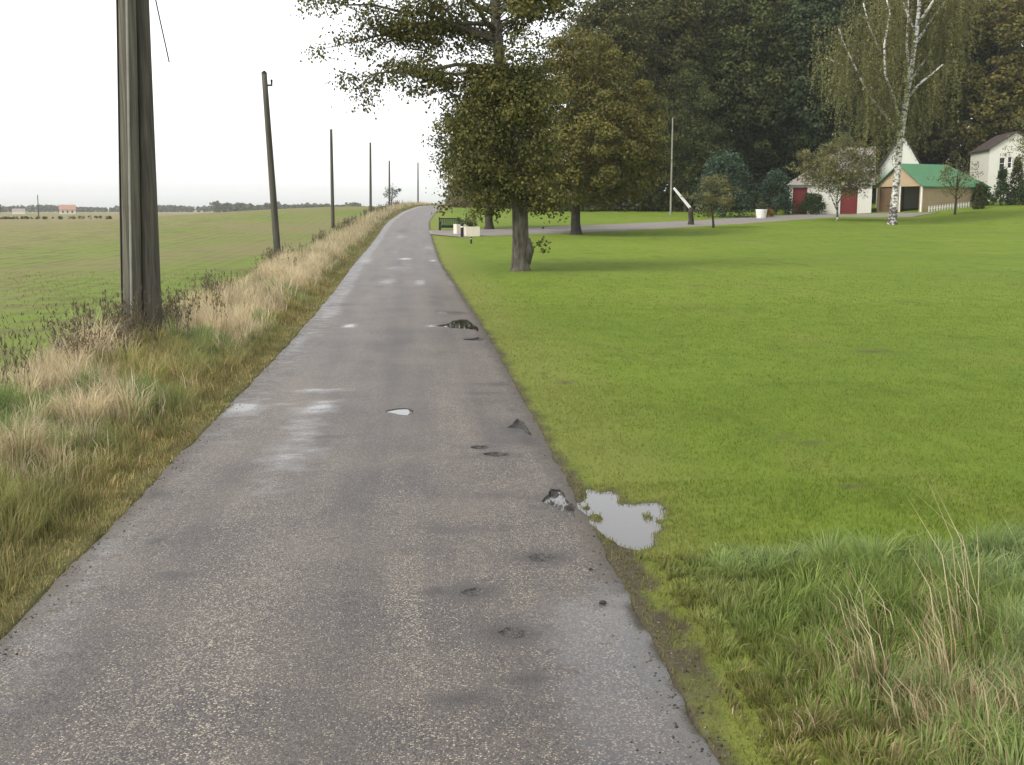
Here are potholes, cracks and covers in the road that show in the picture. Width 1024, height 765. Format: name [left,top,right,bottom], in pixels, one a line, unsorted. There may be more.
pothole [541,488,575,517]
pothole [437,319,478,332]
pothole [508,419,533,437]
pothole [529,553,555,562]
pothole [461,588,485,597]
pothole [498,627,531,639]
